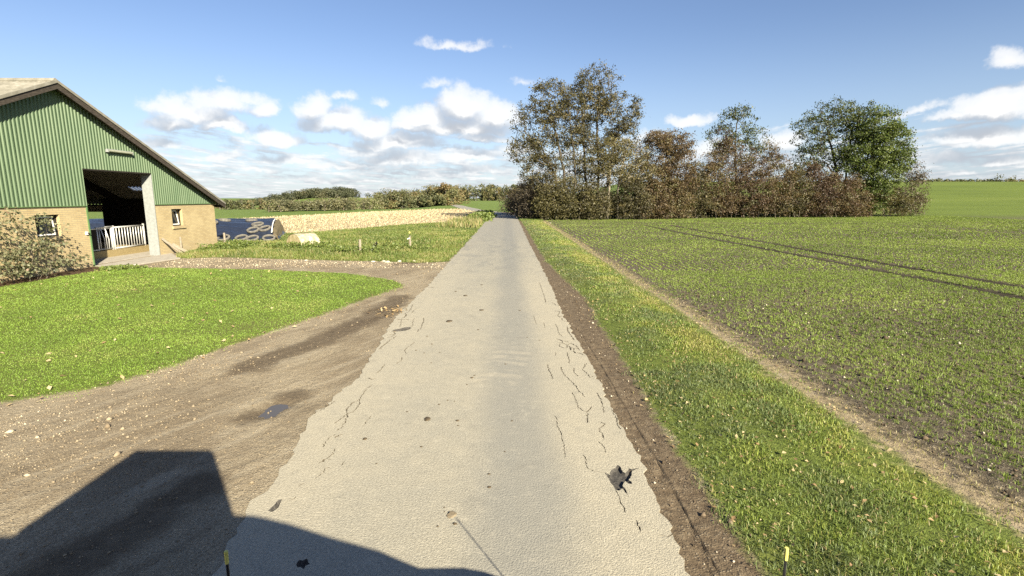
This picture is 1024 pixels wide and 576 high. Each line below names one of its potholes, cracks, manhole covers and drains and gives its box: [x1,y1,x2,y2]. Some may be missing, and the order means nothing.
pothole [605,465,638,497]
crack [534,283,621,473]
crack [292,305,424,500]
